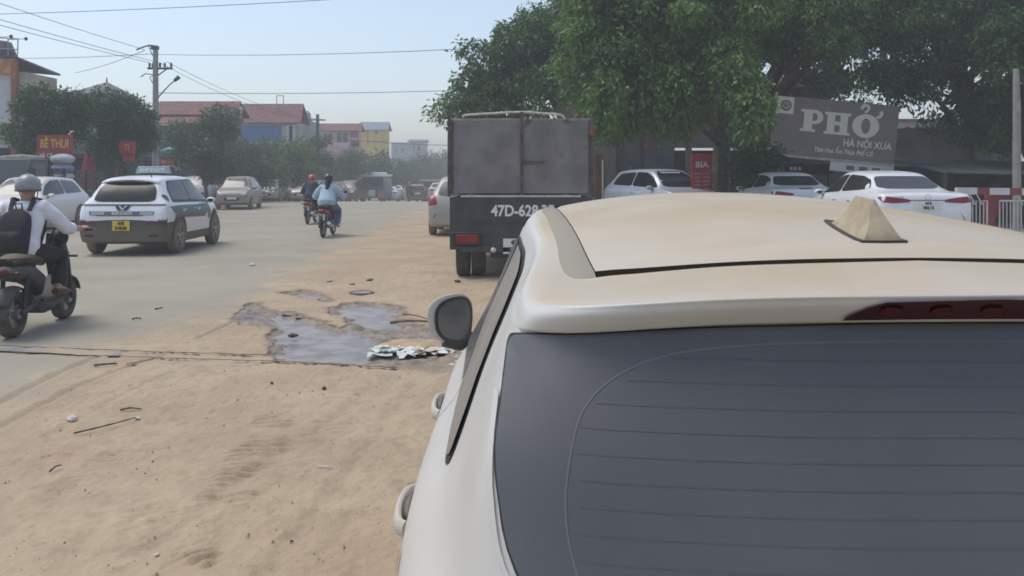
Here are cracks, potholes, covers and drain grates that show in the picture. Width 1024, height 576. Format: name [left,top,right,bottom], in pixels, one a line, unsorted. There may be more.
pothole [281,290,333,302]
pothole [229,302,448,367]
